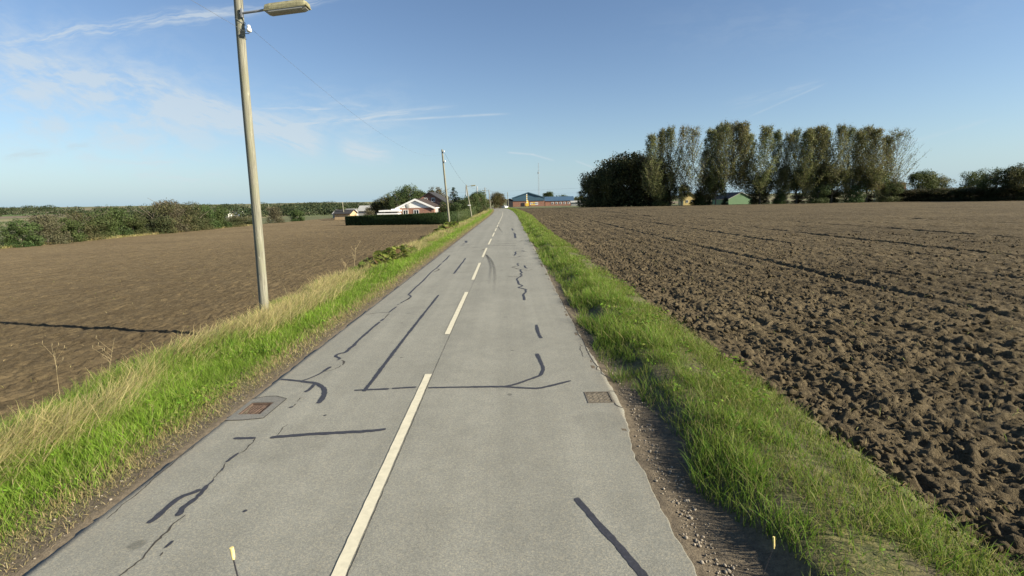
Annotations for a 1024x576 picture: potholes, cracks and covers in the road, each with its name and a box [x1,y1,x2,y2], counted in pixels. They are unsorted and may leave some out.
drain grate [584,391,615,403]
crack [108,439,255,576]
